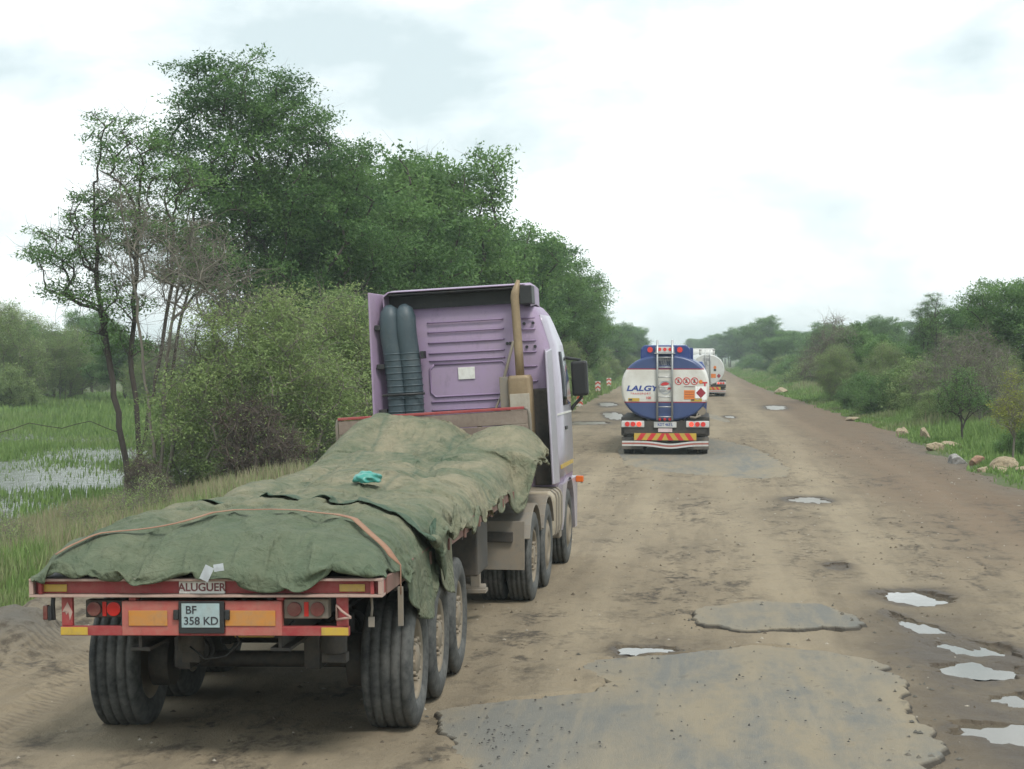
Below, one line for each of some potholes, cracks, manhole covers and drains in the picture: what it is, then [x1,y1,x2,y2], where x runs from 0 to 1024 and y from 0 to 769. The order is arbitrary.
pothole [776,494,843,507]
pothole [805,559,872,577]
pothole [861,586,972,615]
pothole [916,632,1024,680]
pothole [874,608,985,651]
pothole [966,686,1024,714]
pothole [594,641,700,658]
pothole [910,654,1024,692]
pothole [922,714,1024,756]
